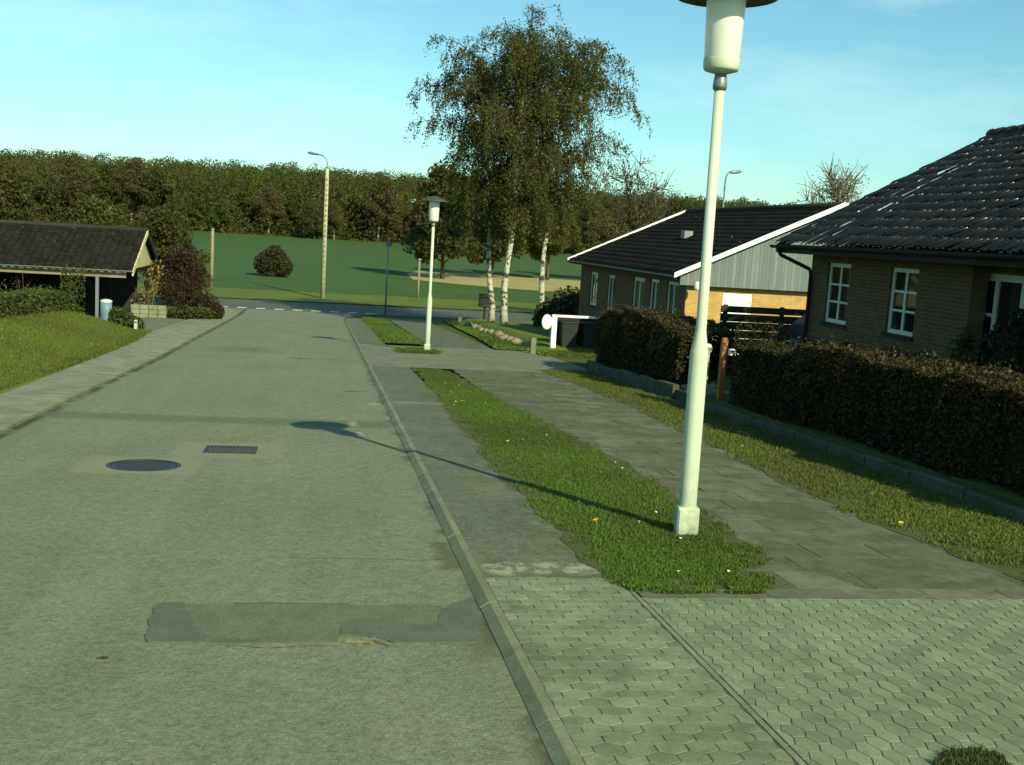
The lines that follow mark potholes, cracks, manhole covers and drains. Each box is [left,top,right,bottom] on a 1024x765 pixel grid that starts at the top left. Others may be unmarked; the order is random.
pothole [340,638,391,647]
drain grate [202,445,258,454]
manhole cover [105,459,181,471]
